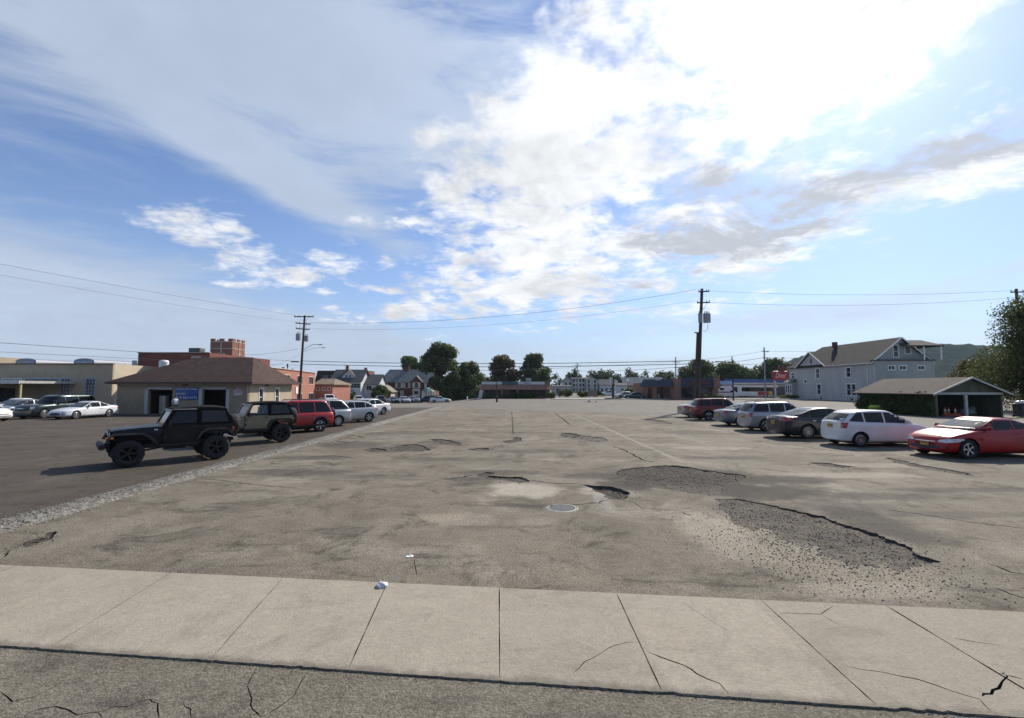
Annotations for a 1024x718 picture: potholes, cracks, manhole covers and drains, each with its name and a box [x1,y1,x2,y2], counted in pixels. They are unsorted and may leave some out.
manhole cover [546,504,578,512]
pothole [2,530,61,549]
pothole [571,436,610,444]
crack [247,667,306,717]
pothole [607,465,752,496]
pothole [474,472,529,484]
crack [847,666,1021,711]
pothole [624,496,1016,608]
crack [1,679,192,718]
pothole [579,484,640,500]
pothole [385,444,430,452]
pothole [882,458,979,476]
